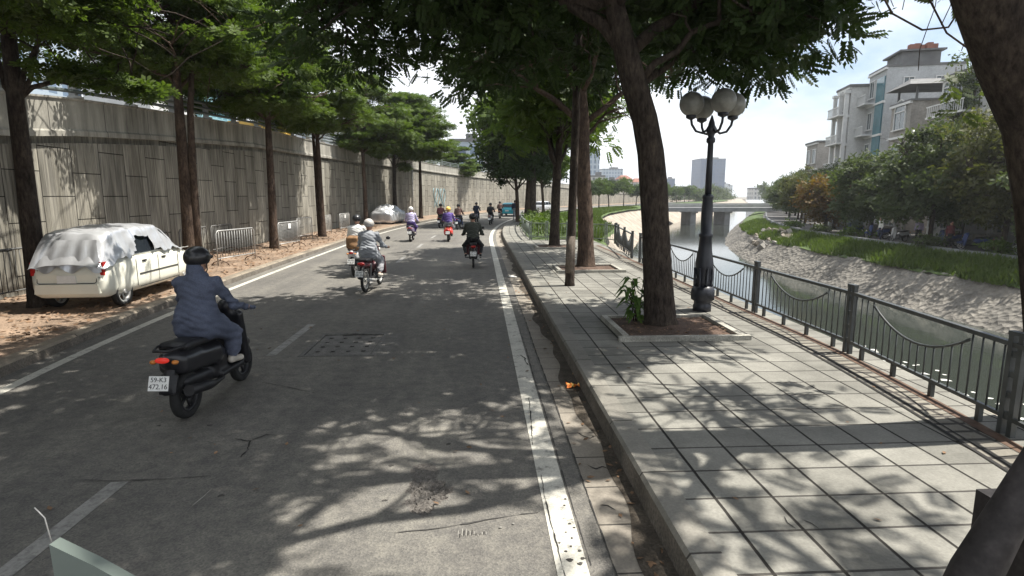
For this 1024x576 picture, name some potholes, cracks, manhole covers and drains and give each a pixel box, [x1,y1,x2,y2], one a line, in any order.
pothole [402,464,455,517]
